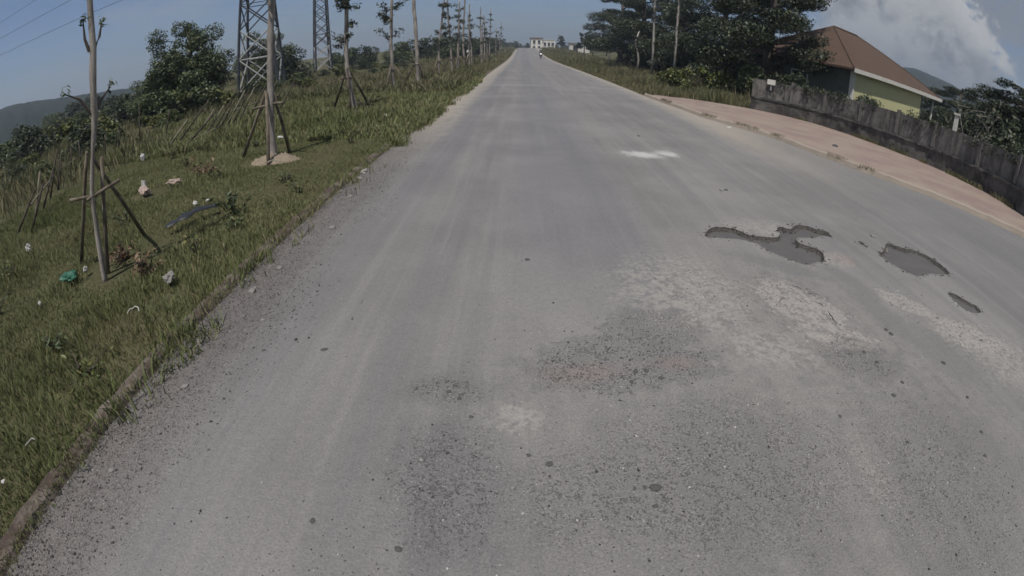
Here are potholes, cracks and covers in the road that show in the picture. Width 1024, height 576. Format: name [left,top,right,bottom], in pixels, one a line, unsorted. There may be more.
pothole [879,243,950,276]
pothole [705,225,832,265]
pothole [948,292,981,313]
